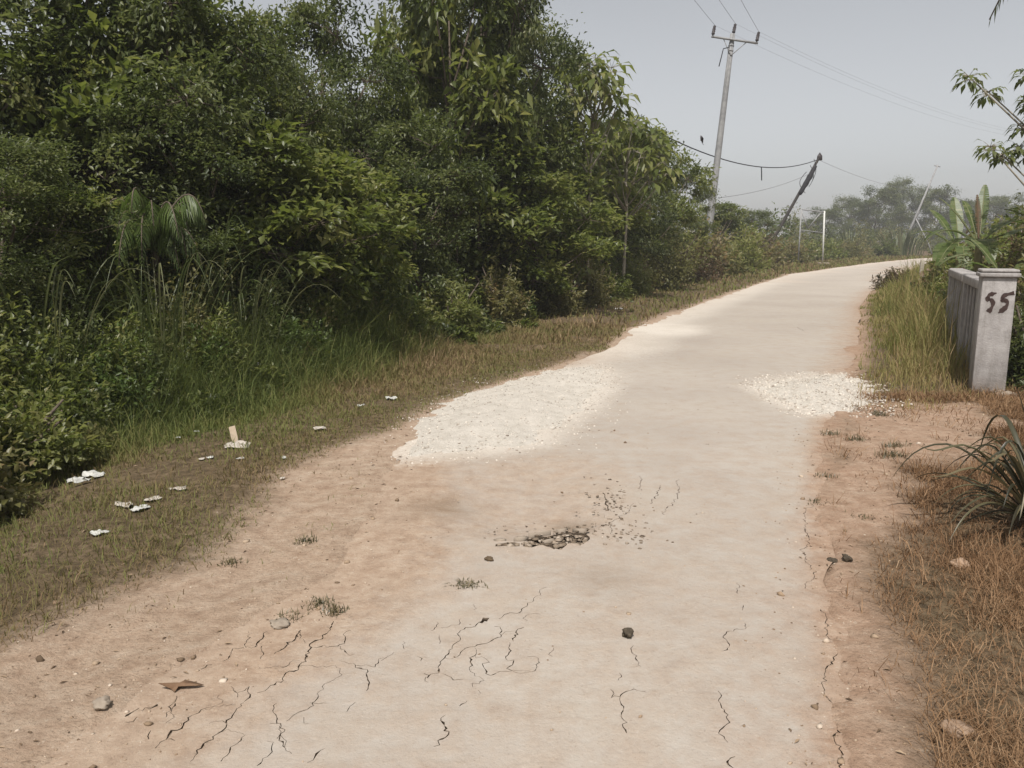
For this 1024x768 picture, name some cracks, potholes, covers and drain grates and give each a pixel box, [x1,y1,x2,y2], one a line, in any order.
crack [600,476,678,535]
crack [381,587,554,692]
crack [718,585,746,768]
crack [434,701,467,747]
crack [800,507,844,768]
crack [125,621,381,766]
